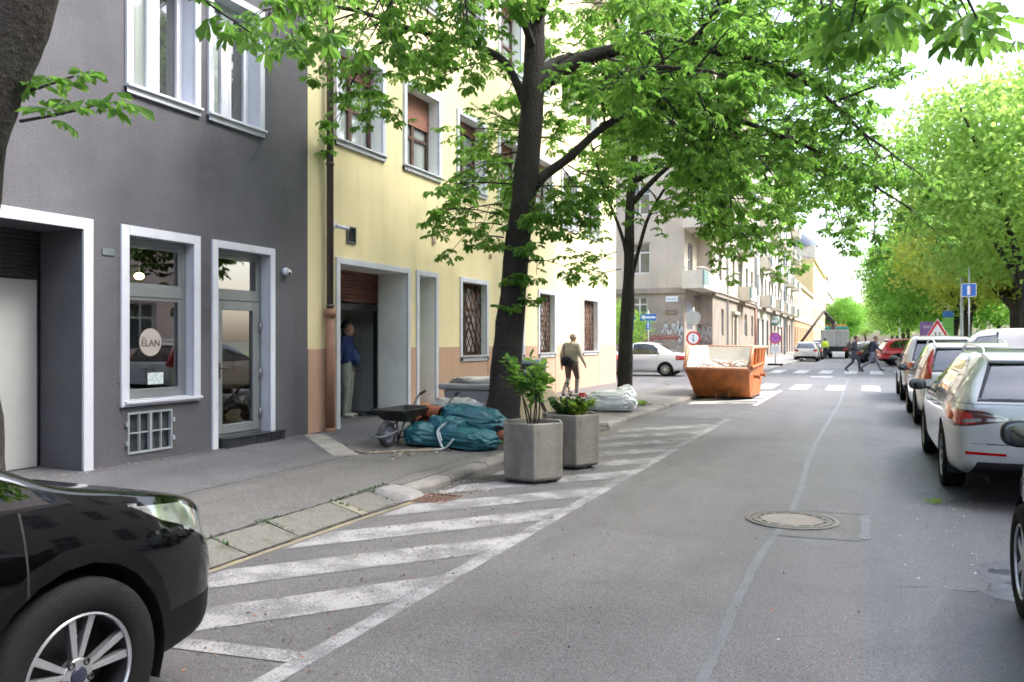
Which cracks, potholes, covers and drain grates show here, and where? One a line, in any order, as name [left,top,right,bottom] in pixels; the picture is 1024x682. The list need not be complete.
manhole cover [746,510,840,530]
drain grate [408,493,463,504]
